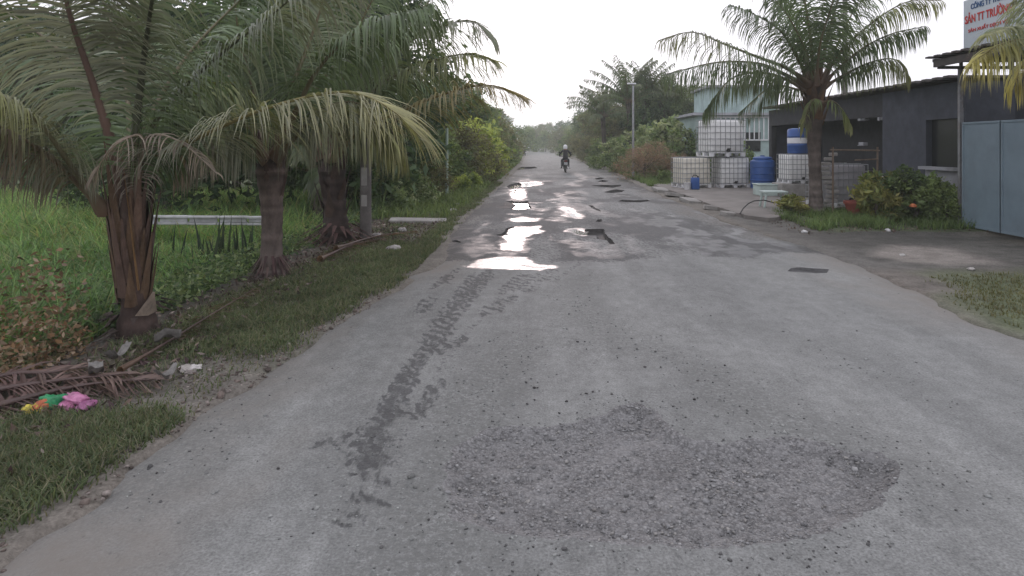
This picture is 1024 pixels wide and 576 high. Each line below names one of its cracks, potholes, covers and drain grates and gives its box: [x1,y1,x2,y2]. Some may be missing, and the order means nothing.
pothole [585,229,615,244]
pothole [496,201,531,209]
pothole [442,402,900,549]
